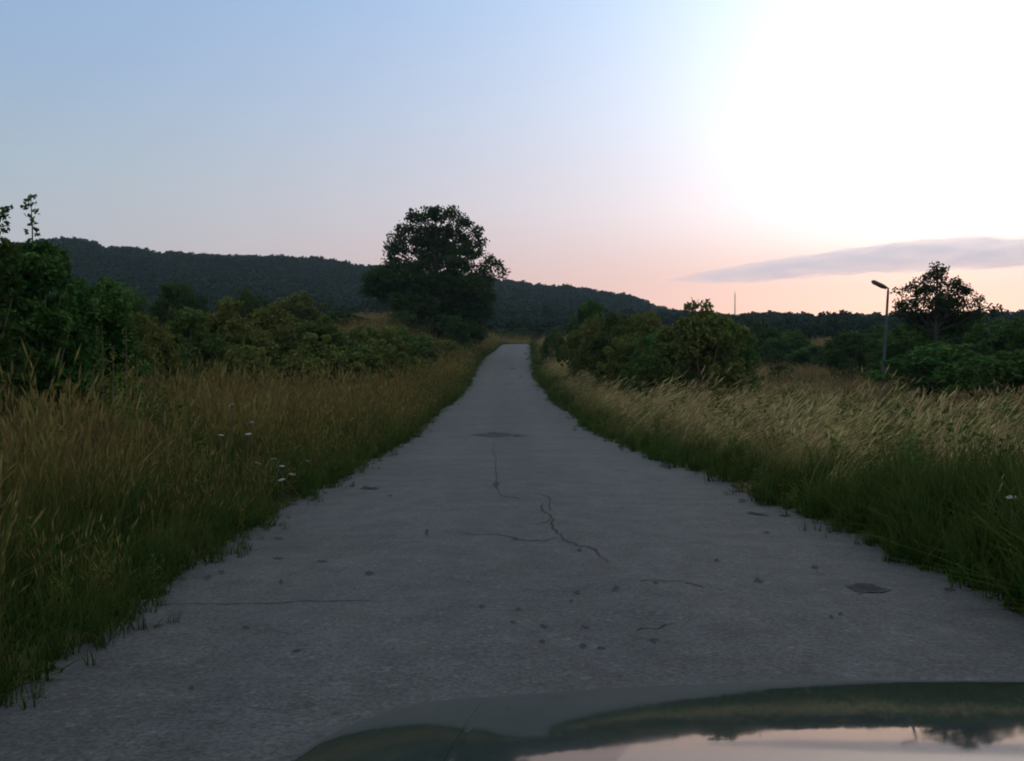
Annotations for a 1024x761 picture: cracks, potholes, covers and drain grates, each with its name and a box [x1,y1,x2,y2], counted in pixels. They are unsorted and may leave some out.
pothole [845,583,890,594]
crack [497,495,609,563]
